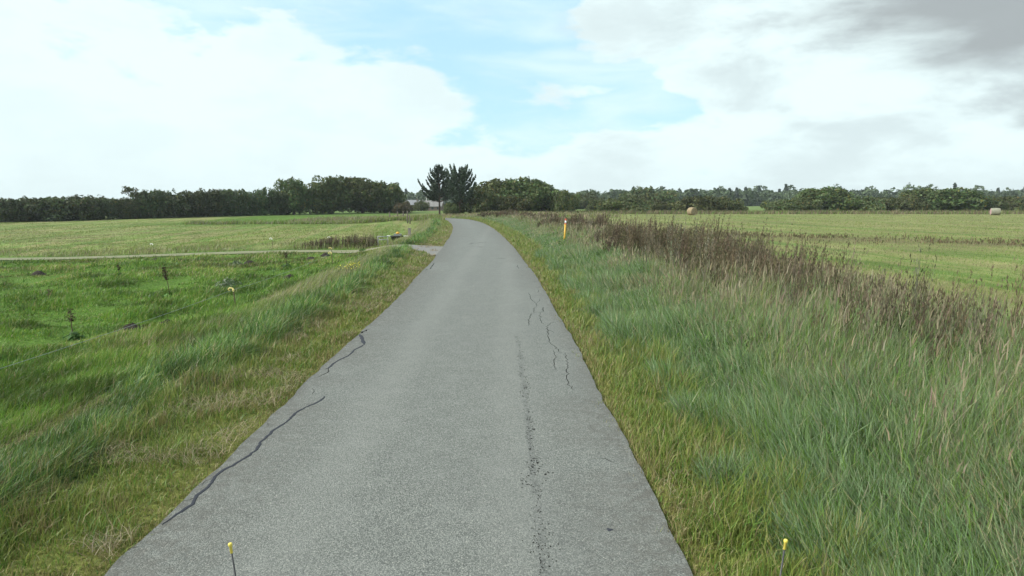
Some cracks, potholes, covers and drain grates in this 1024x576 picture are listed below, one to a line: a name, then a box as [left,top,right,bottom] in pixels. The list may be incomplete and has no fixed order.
crack [528,290,573,388]
